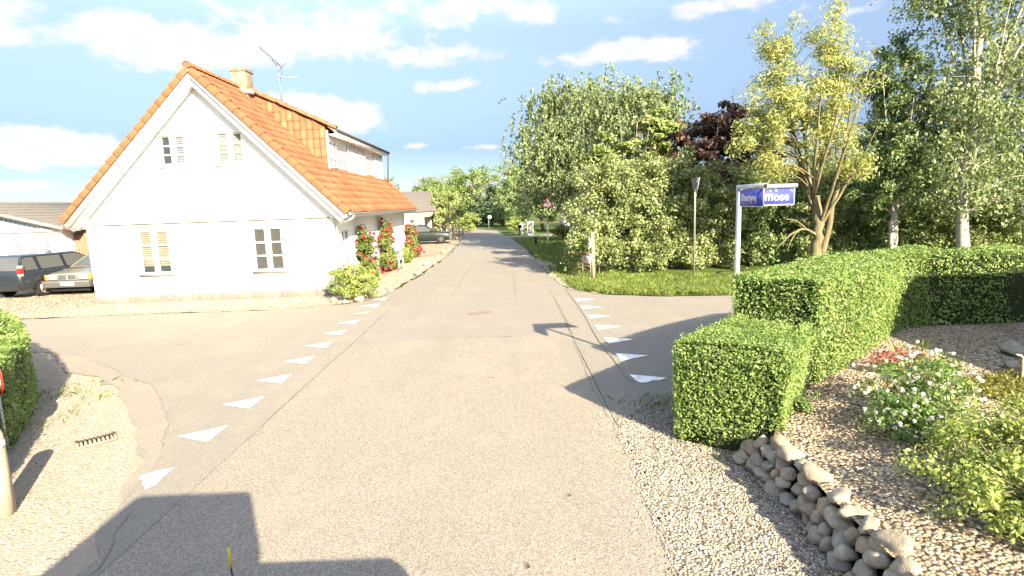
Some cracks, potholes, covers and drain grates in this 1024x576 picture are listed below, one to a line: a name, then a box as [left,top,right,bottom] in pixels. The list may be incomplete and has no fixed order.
crack [88,512,130,576]
crack [47,353,170,447]
drain grate [75,431,118,449]
